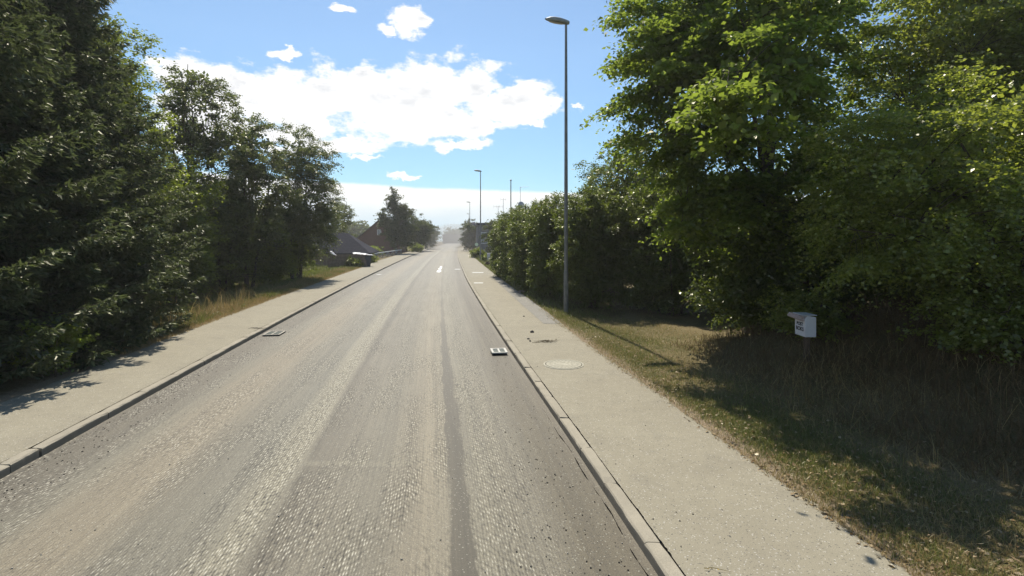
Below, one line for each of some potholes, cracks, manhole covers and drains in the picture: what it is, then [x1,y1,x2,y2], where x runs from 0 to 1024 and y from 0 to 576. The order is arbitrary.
manhole cover [543,359,584,370]
drain grate [490,348,508,356]
